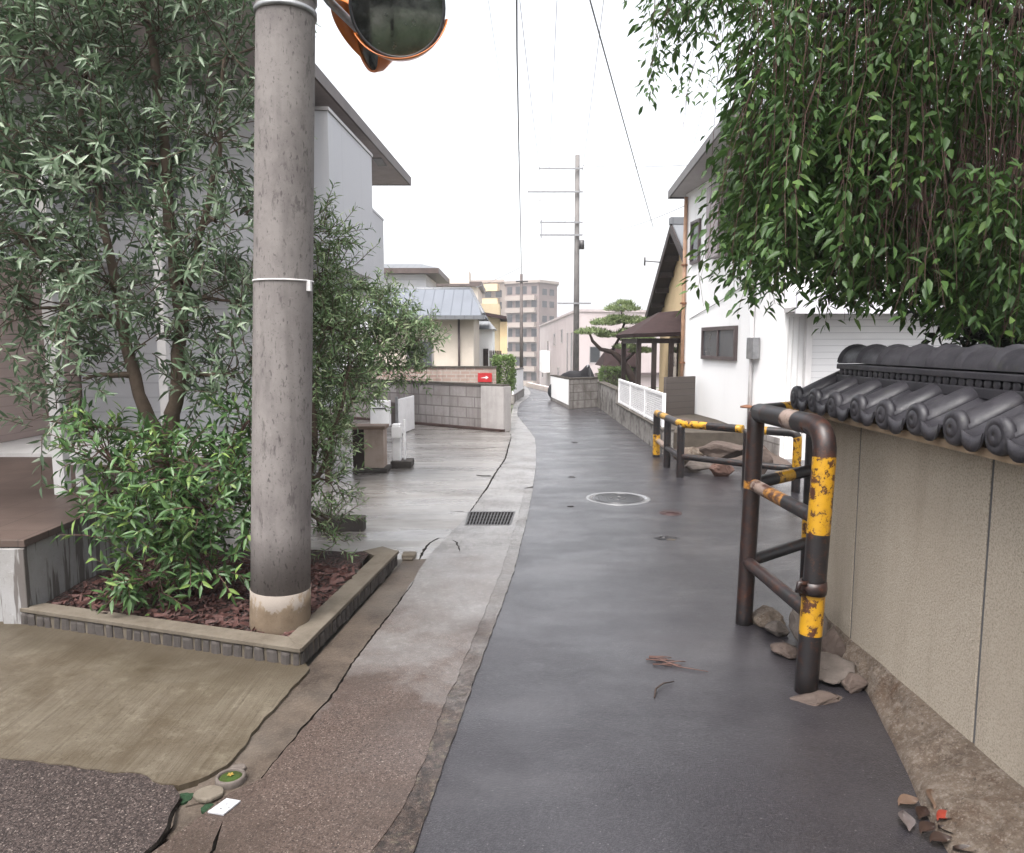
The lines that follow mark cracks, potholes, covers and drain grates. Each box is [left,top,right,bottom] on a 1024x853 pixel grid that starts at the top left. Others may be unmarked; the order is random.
manhole cover [586,492,651,505]
crack [210,824,222,853]
crack [455,439,511,512]
drain grate [465,511,515,525]
crack [144,798,183,853]
crack [419,538,460,560]
